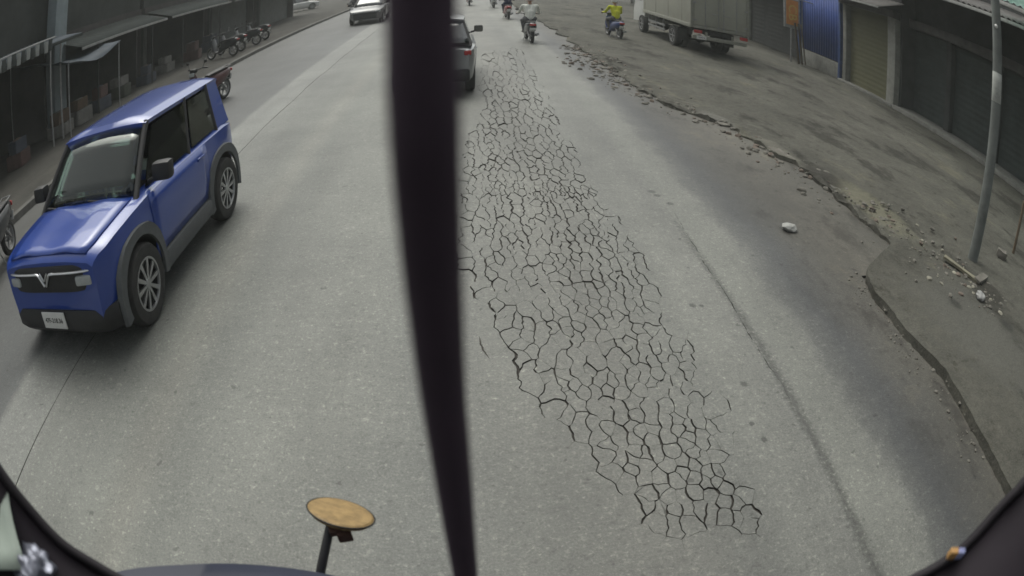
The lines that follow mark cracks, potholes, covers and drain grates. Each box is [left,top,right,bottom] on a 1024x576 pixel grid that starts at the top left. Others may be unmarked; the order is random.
crack [462,49,762,539]
